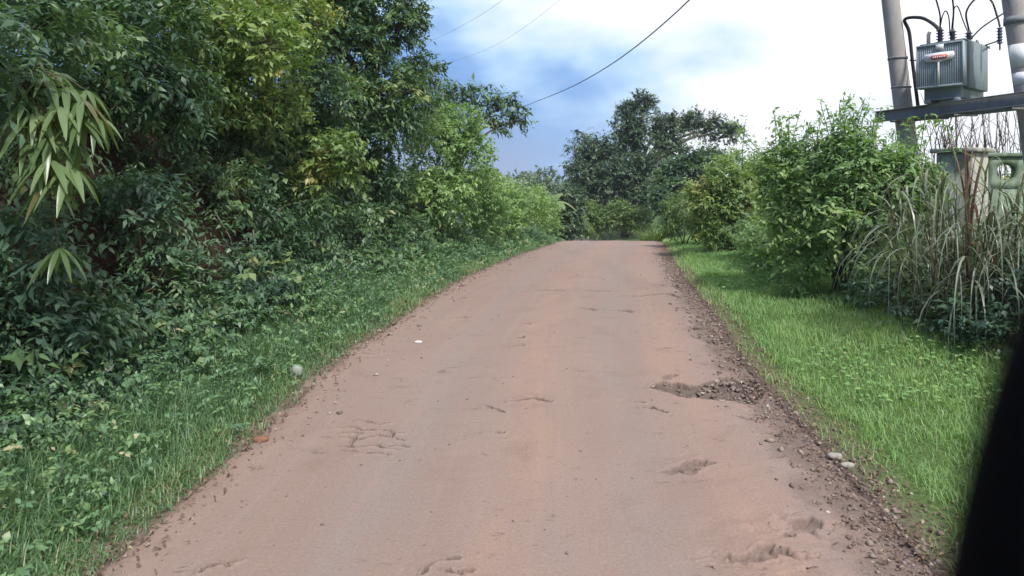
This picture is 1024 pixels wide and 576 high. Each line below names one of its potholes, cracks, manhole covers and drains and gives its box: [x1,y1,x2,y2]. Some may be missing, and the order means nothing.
crack [468,392,566,442]
crack [263,408,427,464]
pothole [635,450,729,483]
pothole [690,532,821,576]
crack [621,398,681,419]
pothole [632,373,776,412]
